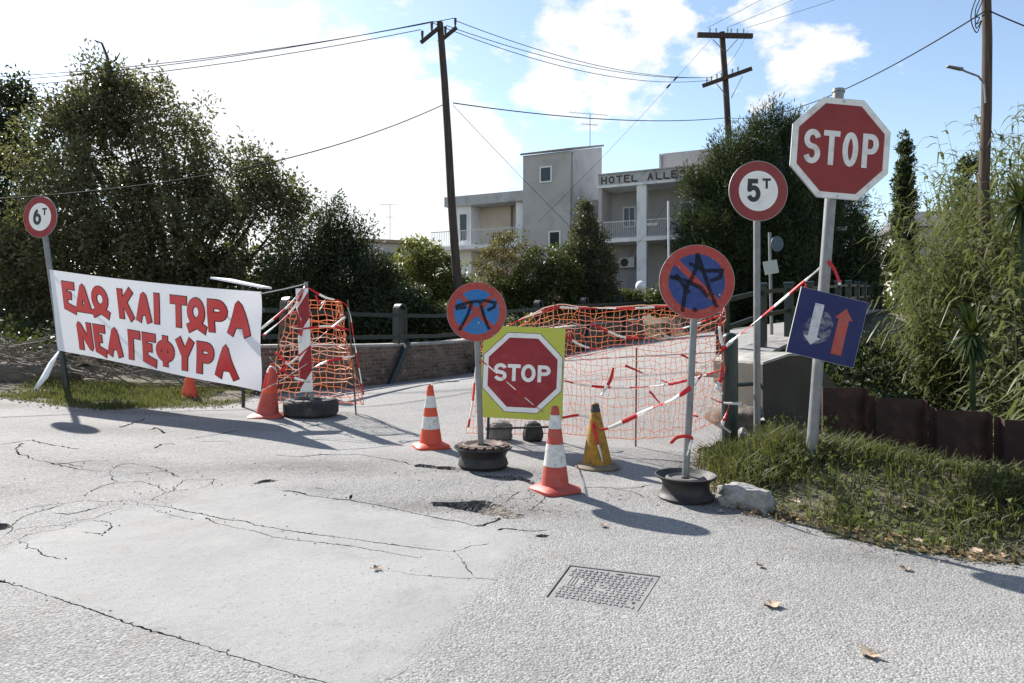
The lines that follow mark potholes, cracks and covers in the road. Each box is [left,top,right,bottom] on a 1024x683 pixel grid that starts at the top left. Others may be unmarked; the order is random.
manhole cover [543,564,663,613]
crack [287,488,547,532]
crack [0,440,494,580]
pothole [430,500,525,519]
